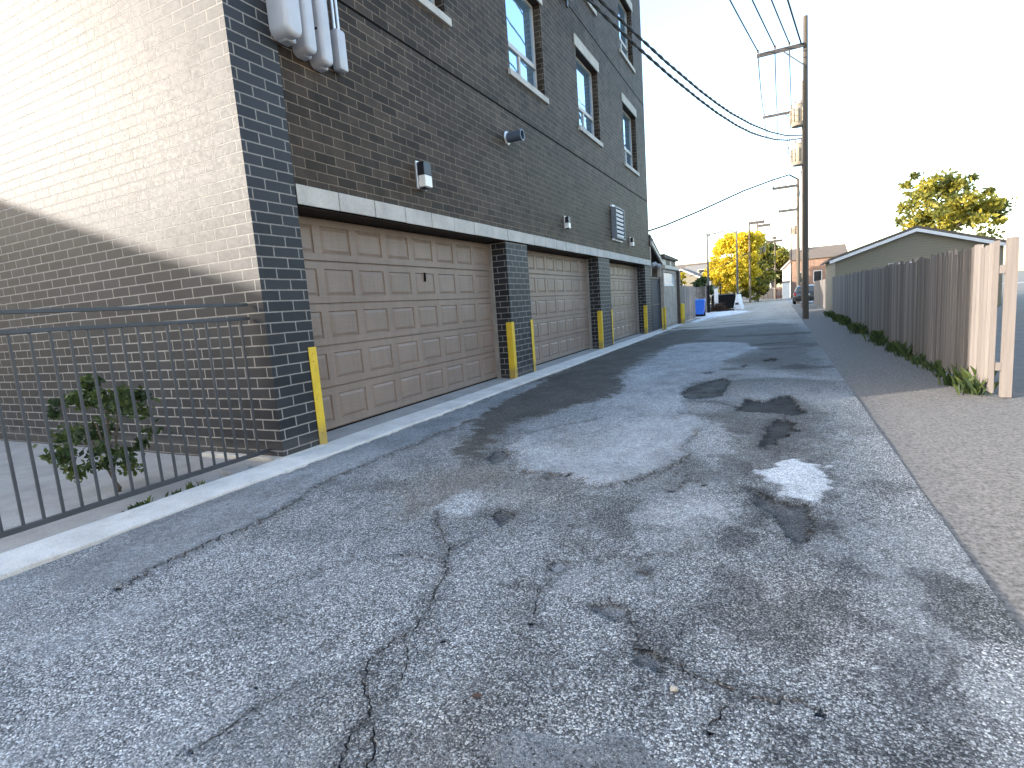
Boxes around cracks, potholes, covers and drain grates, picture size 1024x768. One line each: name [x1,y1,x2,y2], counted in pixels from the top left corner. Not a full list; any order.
pothole [734,396,806,416]
pothole [491,510,518,527]
crack [109,430,477,768]
crack [615,614,826,737]
pothole [680,378,730,399]
pothole [487,450,511,464]
pothole [757,417,802,448]
crack [511,571,564,625]
